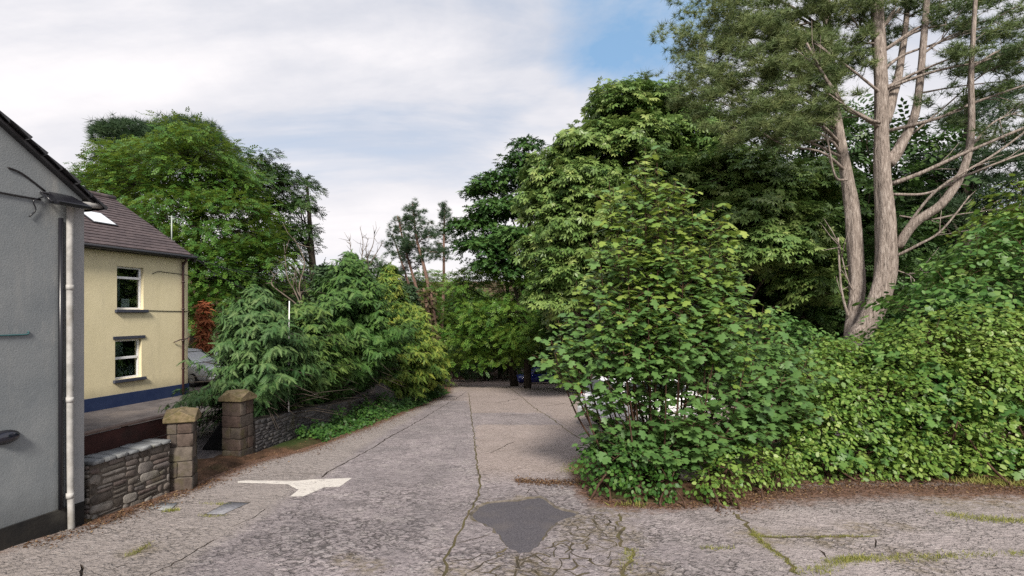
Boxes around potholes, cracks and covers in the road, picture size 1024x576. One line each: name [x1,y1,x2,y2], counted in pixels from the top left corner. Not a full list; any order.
crack [115,509,265,576]
crack [732,512,877,575]
manhole cover [205,501,250,515]
manhole cover [148,502,179,512]
crack [433,513,636,576]
